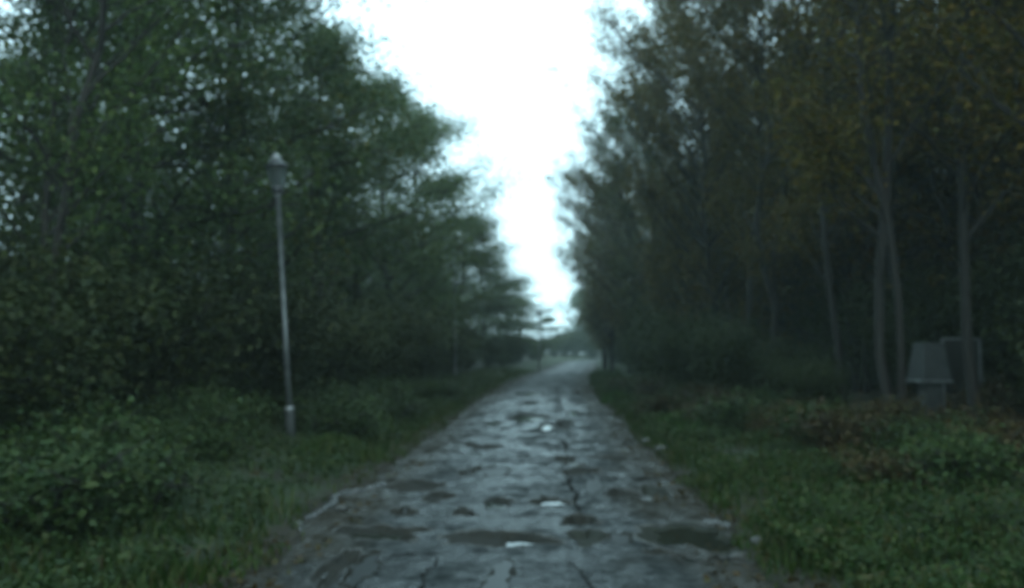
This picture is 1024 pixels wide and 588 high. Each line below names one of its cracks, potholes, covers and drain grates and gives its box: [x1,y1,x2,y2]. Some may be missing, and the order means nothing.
pothole [421,489,457,505]
pothole [559,512,605,526]
pothole [507,412,555,422]
pothole [632,521,746,558]
pothole [451,505,478,517]
crack [384,552,448,588]
pothole [437,528,569,548]
crack [569,561,594,588]
pothole [603,487,643,501]
pothole [387,505,421,517]
crack [566,477,657,513]
